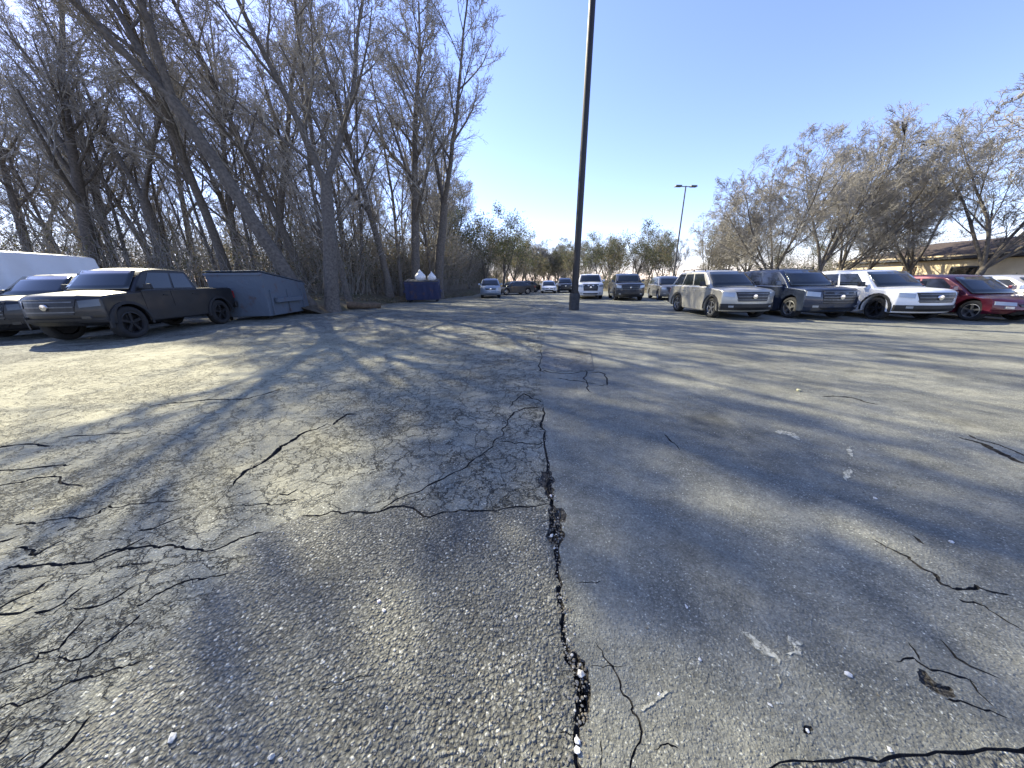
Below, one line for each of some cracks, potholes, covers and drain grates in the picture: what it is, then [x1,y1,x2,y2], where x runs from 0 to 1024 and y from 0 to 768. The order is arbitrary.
crack [873,536,1022,718]
crack [0,464,84,487]
crack [215,393,553,518]
crack [148,389,280,407]
crack [321,674,375,690]
crack [588,643,678,768]
crack [0,498,263,768]
pothole [916,668,956,698]
crack [0,430,140,448]
crack [959,435,1024,464]
crack [538,351,608,392]
